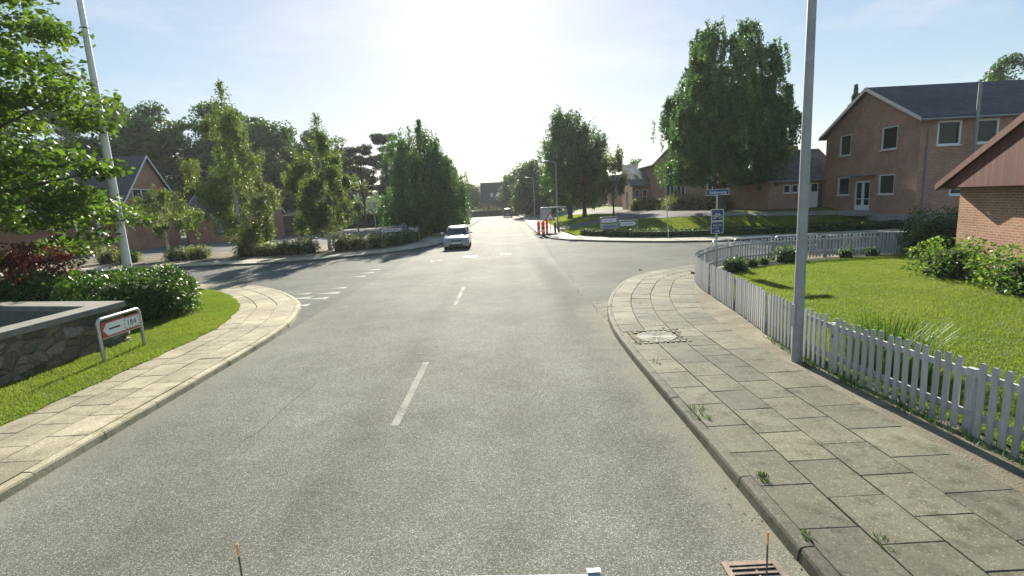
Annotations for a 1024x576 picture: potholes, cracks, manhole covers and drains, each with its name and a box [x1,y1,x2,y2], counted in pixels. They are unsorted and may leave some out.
drain grate [720,559,788,576]
manhole cover [622,328,692,347]
